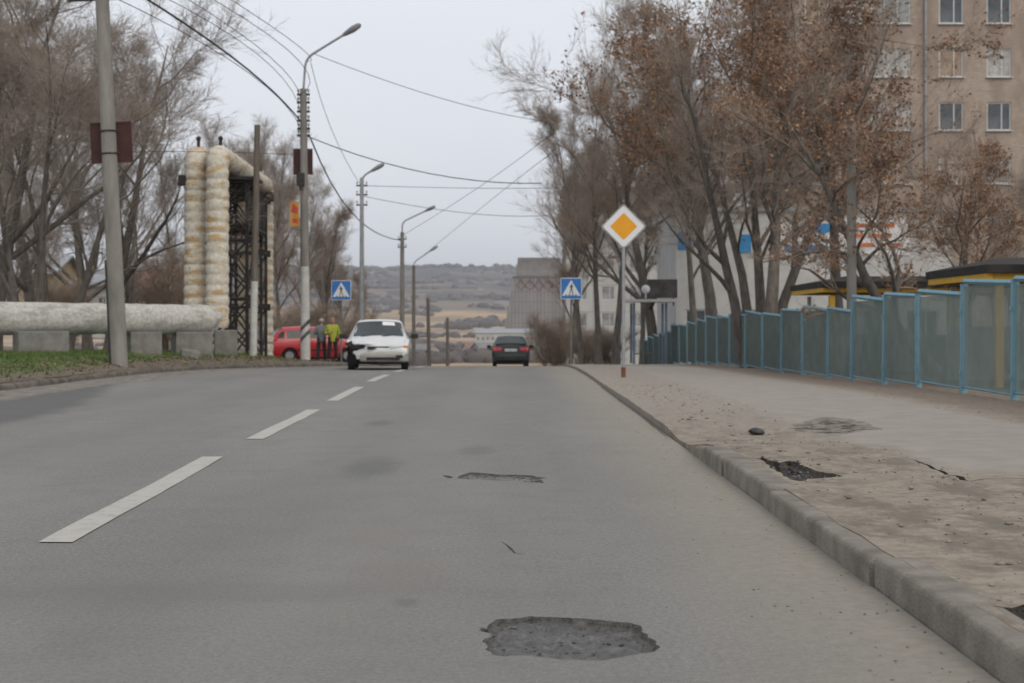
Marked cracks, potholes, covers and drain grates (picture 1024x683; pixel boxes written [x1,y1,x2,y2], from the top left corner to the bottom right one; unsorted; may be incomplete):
crack [909,459,1016,481]
pothole [479,616,660,661]
pothole [760,457,841,481]
pothole [458,472,544,483]
